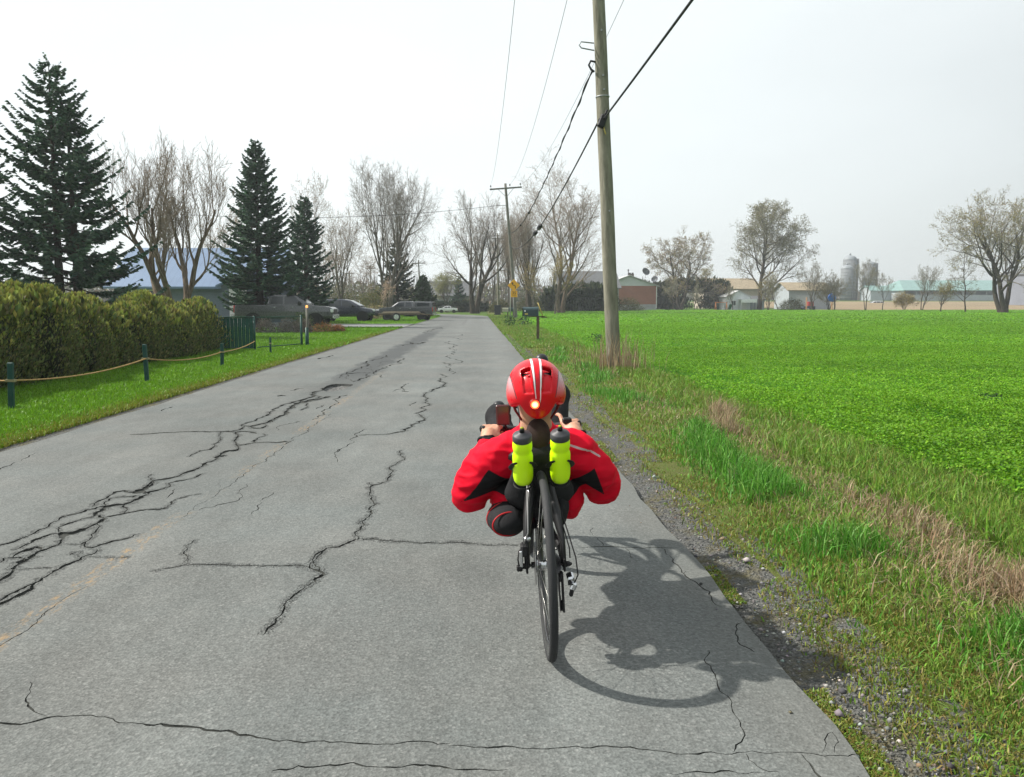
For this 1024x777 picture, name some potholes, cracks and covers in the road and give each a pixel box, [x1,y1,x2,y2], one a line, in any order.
pothole [322,384,353,392]
crack [152,451,519,634]
crack [0,528,858,777]
crack [0,328,463,646]
